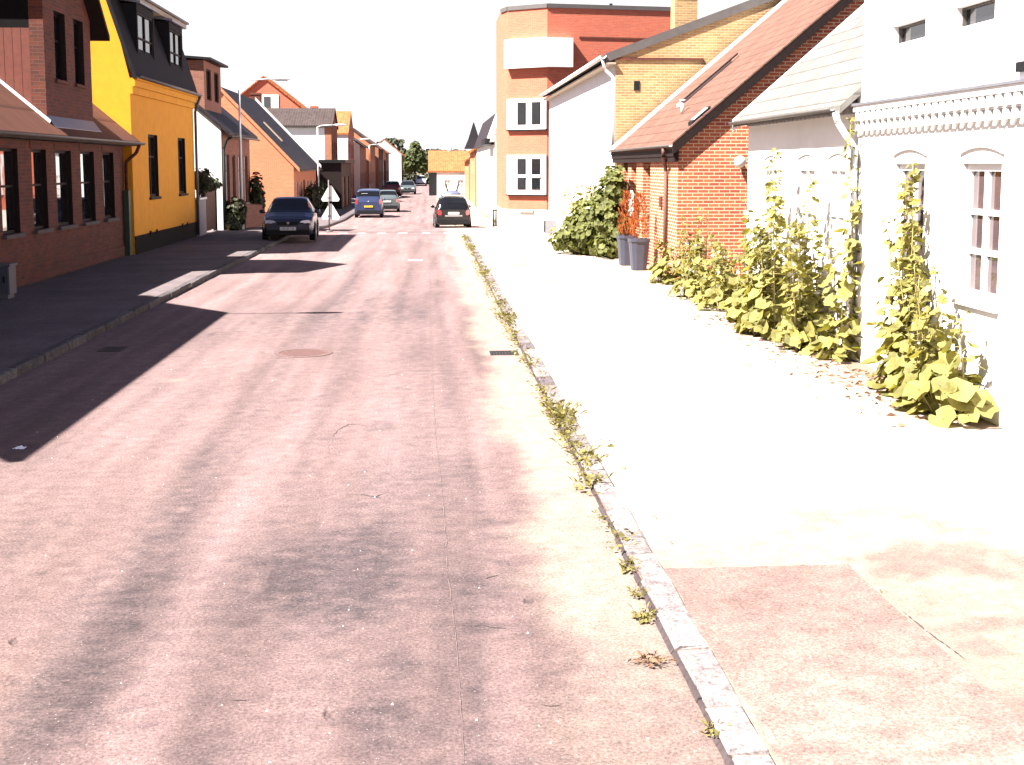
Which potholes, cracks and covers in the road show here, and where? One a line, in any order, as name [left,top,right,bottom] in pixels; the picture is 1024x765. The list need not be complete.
manhole cover [275,348,333,358]
